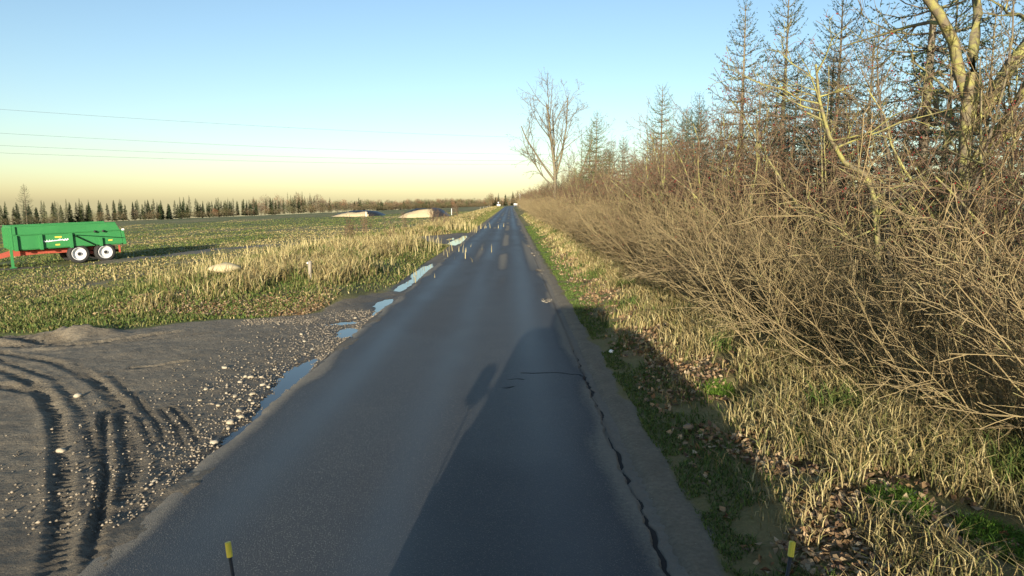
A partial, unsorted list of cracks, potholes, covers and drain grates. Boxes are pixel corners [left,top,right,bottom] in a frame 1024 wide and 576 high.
crack [573,351,671,576]
